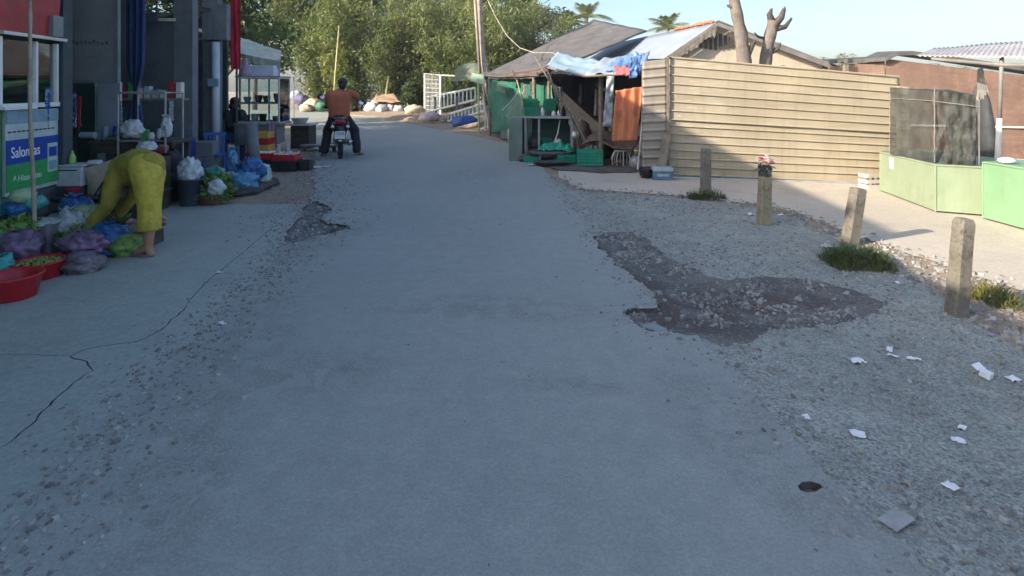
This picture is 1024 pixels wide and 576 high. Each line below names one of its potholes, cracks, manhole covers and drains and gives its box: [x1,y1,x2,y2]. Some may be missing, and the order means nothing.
pothole [798,481,822,492]
pothole [284,201,350,243]
pothole [593,231,889,347]
crack [0,224,278,448]
